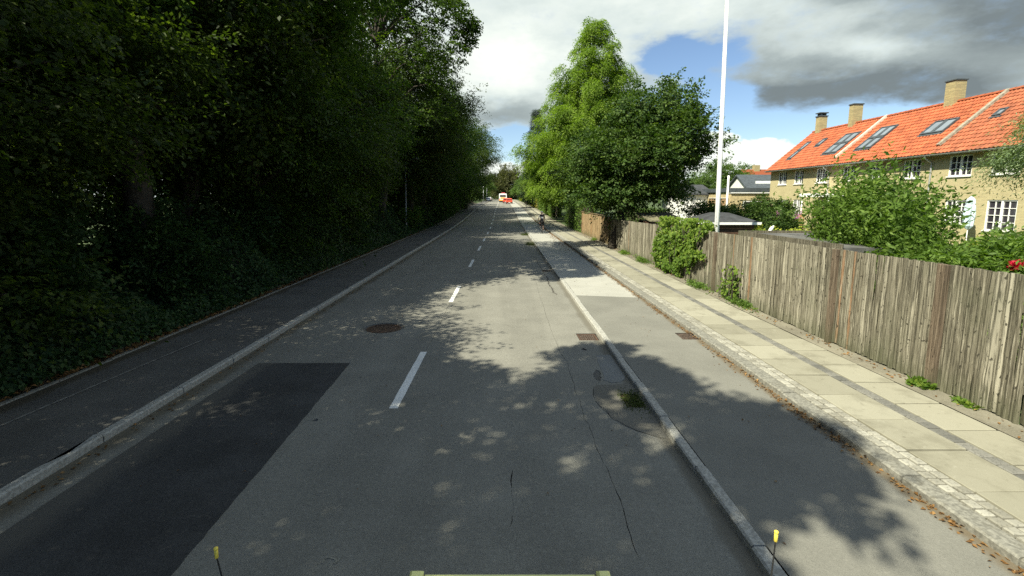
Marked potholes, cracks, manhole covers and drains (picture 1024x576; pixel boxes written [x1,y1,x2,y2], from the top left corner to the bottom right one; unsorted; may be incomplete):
manhole cover [362,323,405,333]
drain grate [576,334,599,344]
crack [536,260,639,557]
